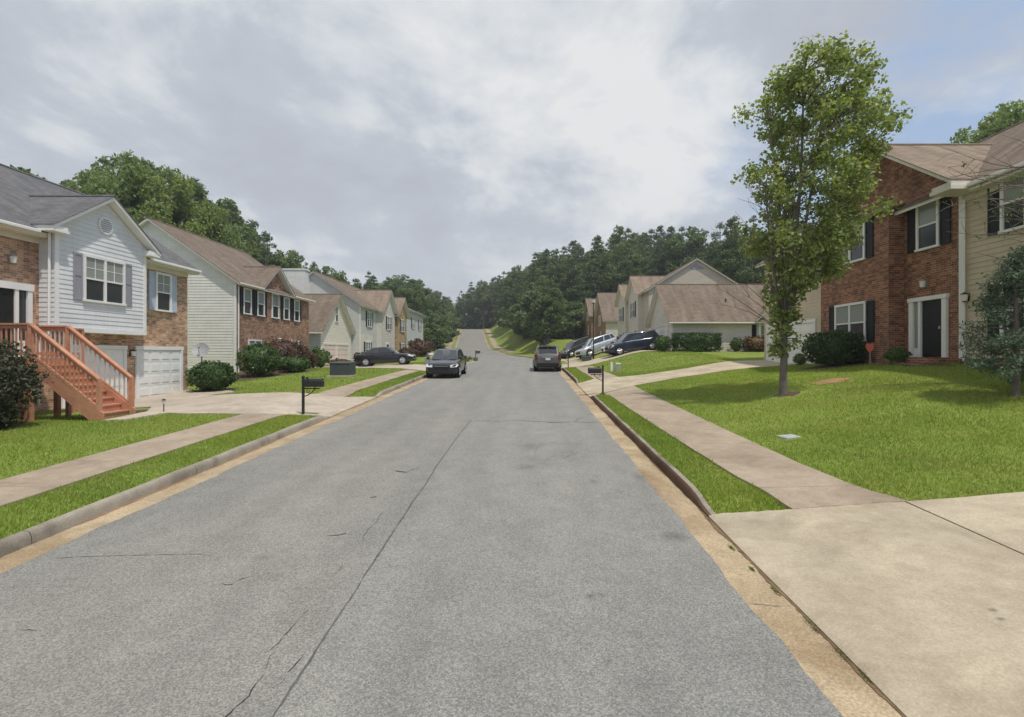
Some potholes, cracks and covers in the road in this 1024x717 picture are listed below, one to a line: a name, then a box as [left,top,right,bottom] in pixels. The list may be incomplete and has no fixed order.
crack [225,611,307,717]
